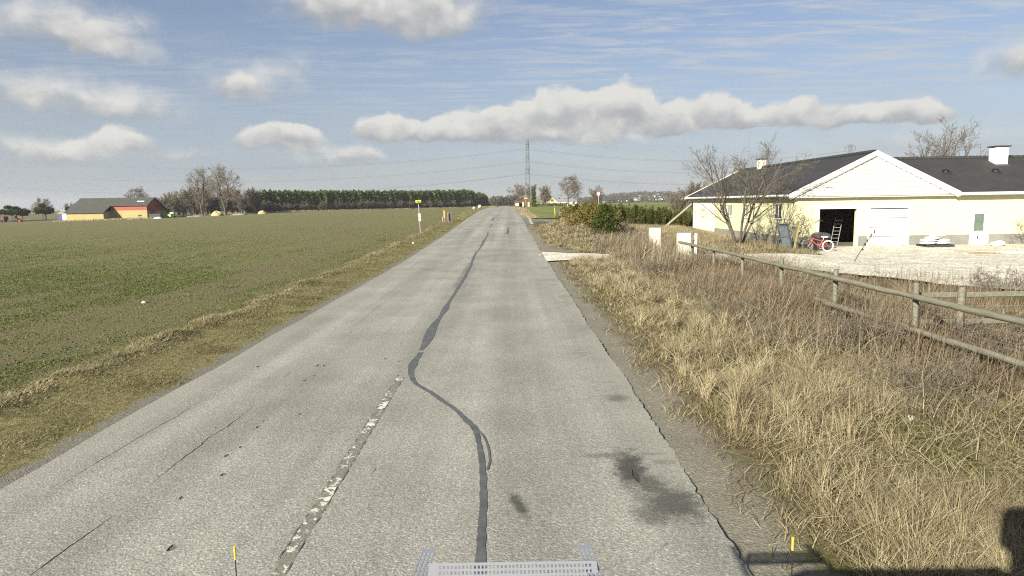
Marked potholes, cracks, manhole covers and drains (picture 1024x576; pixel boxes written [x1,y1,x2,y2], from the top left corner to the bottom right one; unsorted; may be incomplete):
crack [59,404,196,488]
crack [158,410,248,478]
crack [31,517,111,575]
